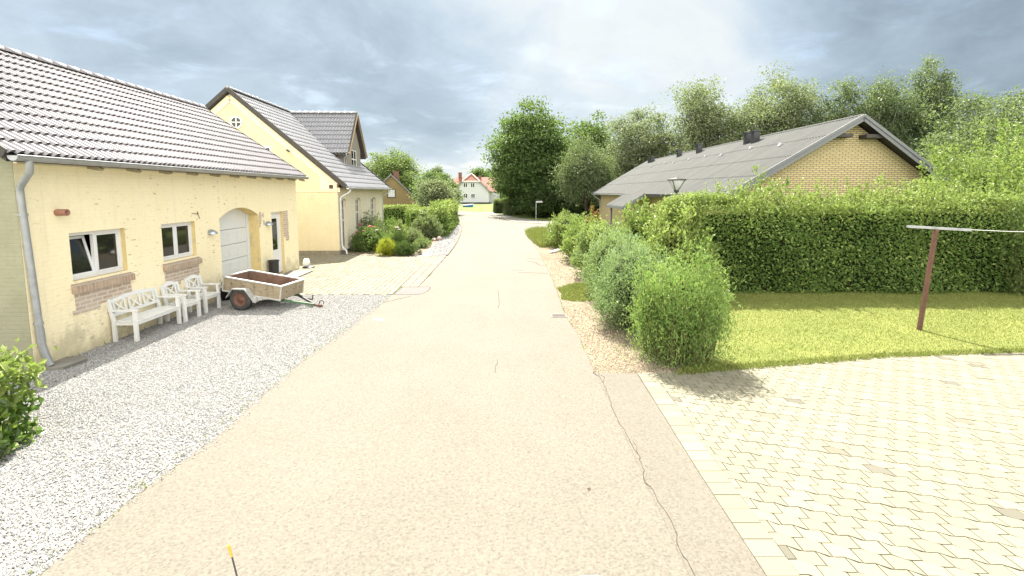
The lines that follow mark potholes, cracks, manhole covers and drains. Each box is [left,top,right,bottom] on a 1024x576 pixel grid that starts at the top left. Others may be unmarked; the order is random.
crack [594,372,695,576]
